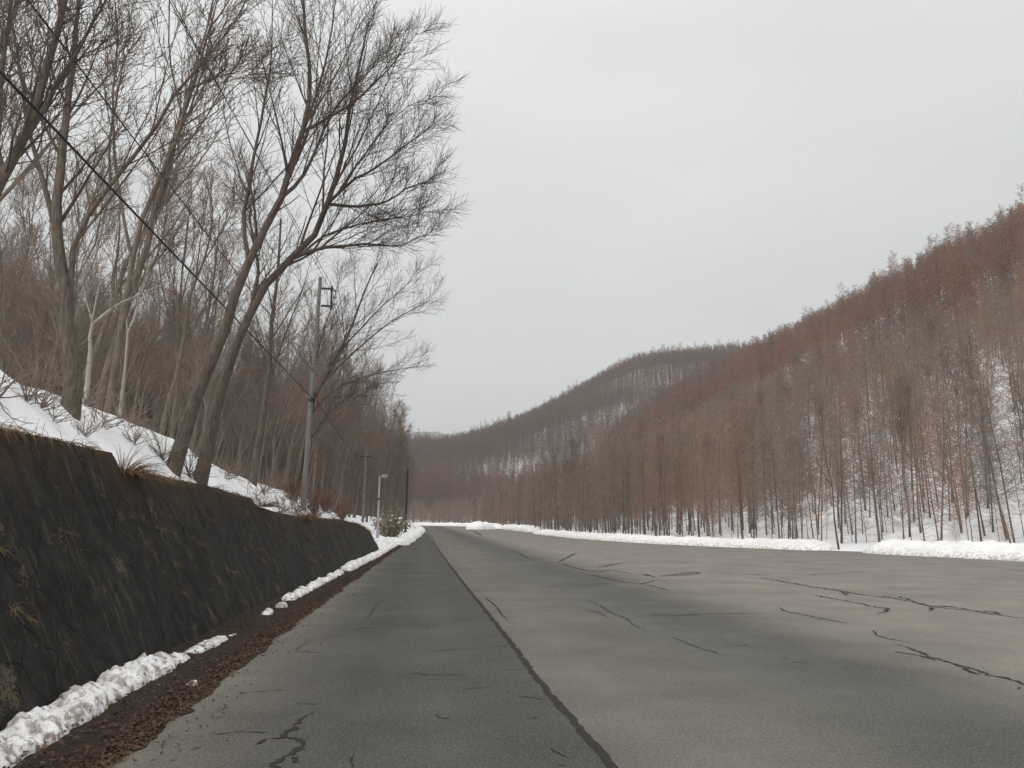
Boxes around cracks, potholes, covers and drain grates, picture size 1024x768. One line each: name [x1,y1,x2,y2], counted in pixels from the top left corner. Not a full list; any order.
crack [558,553,693,590]
crack [585,600,731,629]
crack [191,702,326,768]
